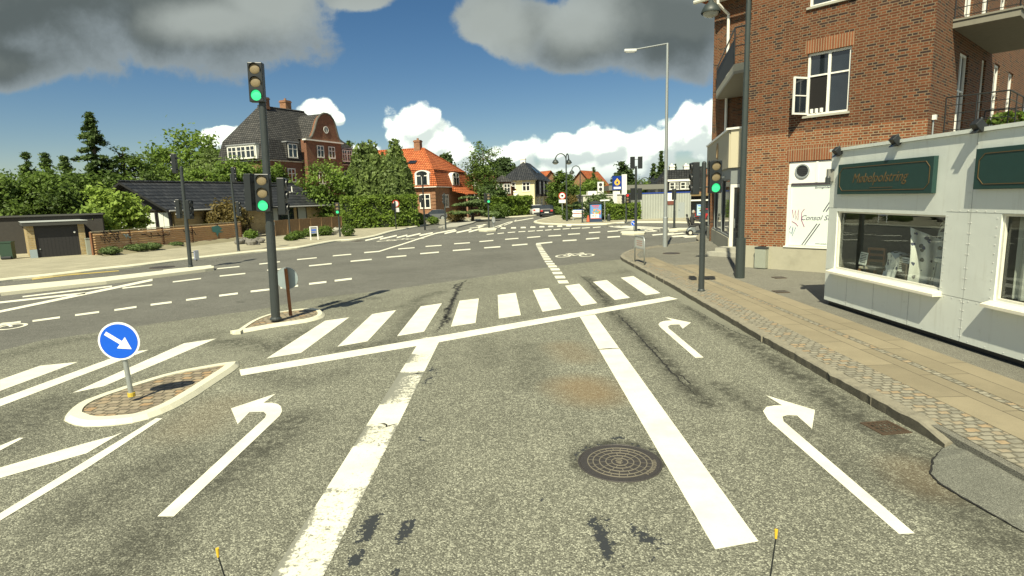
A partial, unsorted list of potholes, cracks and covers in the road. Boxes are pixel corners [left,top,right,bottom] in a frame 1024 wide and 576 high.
drain grate [860,420,912,435]
manhole cover [578,444,663,483]
crack [434,280,467,333]
